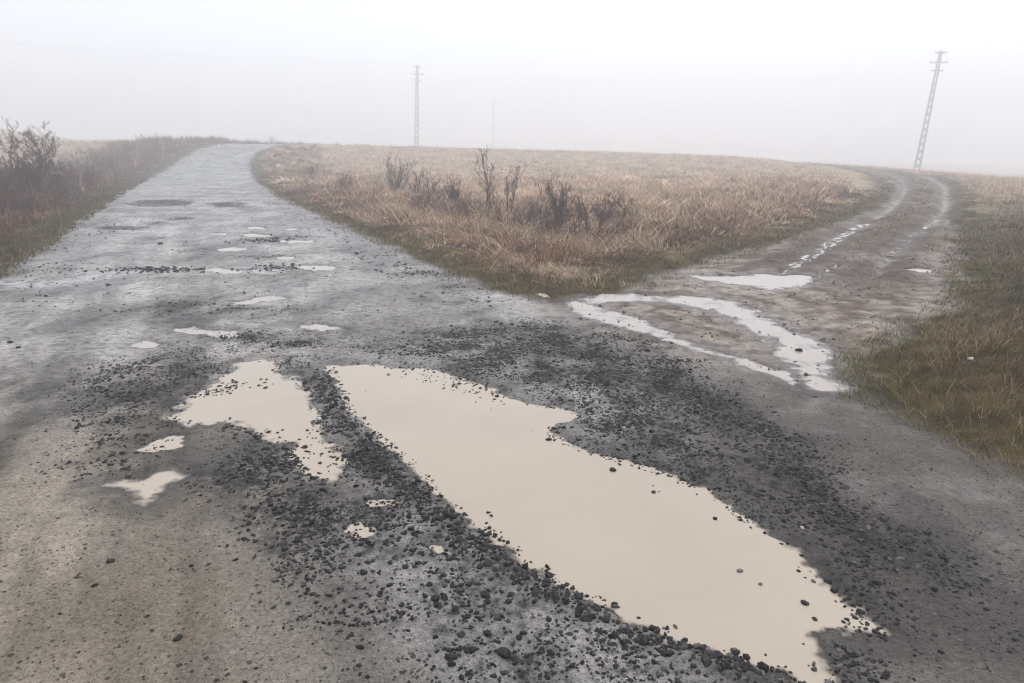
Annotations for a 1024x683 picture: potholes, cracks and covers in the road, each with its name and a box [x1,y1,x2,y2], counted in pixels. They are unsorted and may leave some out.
pothole [68,457,204,521]
pothole [288,320,352,333]
pothole [160,323,248,343]
